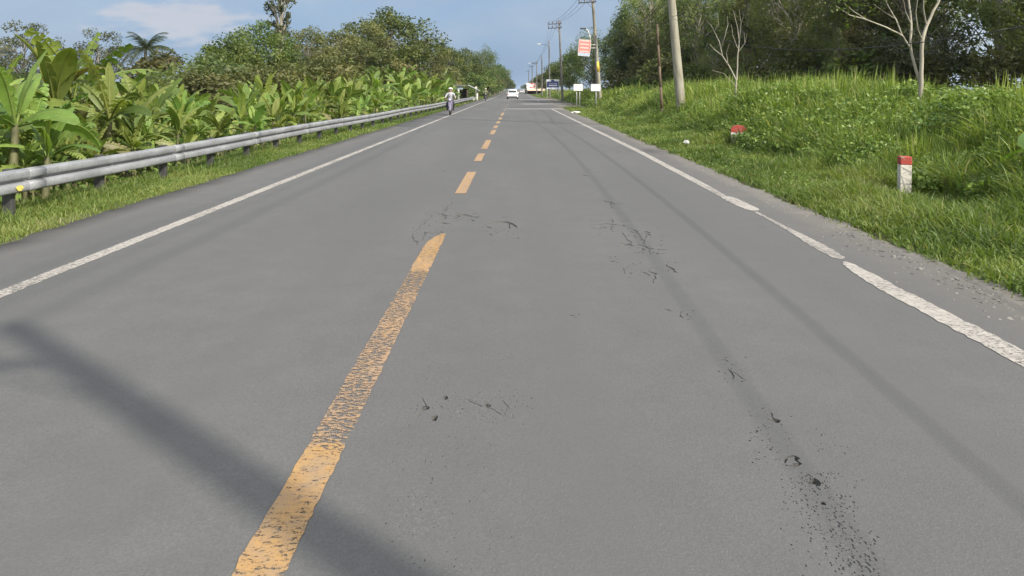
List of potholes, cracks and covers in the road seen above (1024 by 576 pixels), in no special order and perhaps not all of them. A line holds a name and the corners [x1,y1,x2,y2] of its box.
crack [411,202,519,245]
crack [591,201,677,283]
